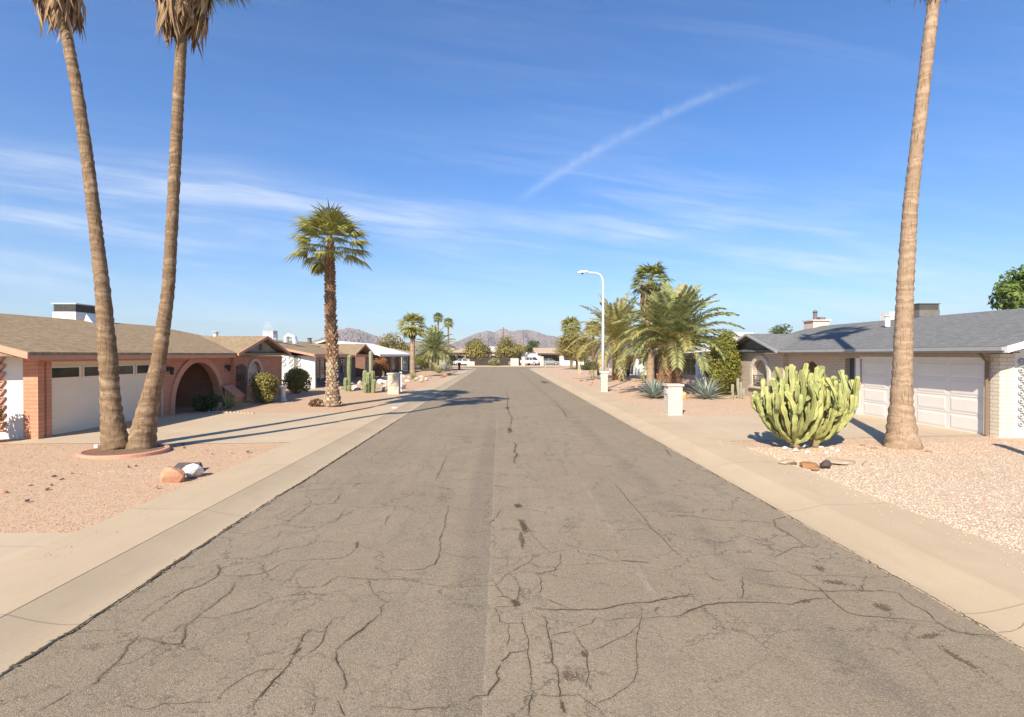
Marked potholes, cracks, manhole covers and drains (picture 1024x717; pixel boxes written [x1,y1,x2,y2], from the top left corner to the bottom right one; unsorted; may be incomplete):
crack [0,420,1024,717]
